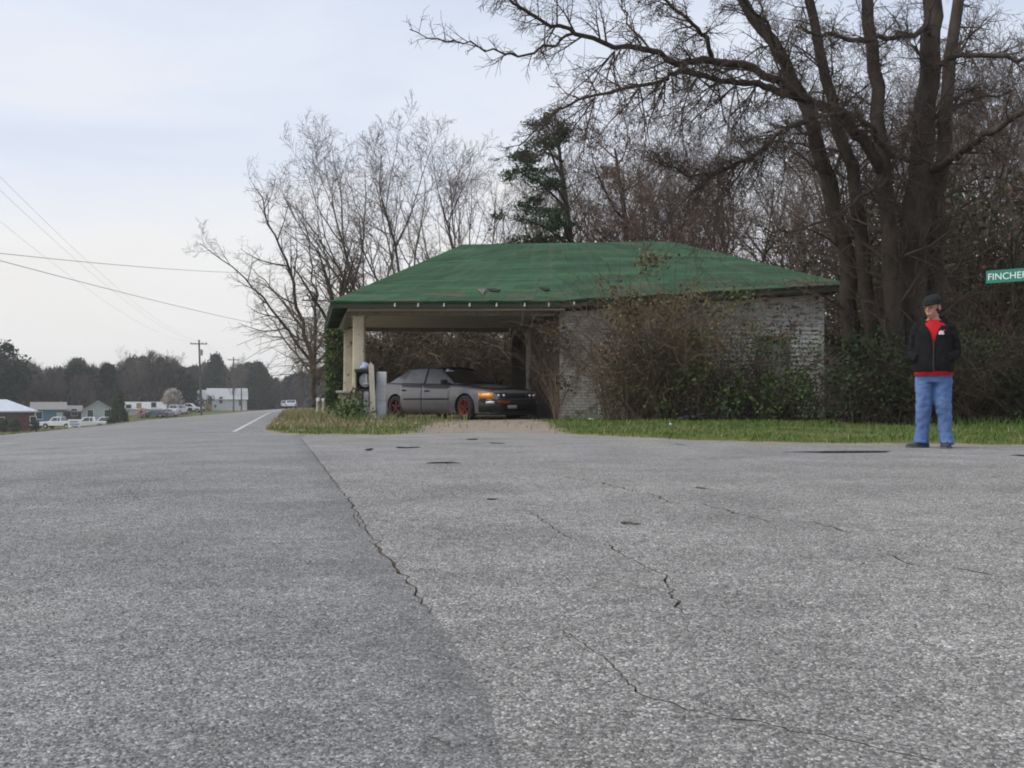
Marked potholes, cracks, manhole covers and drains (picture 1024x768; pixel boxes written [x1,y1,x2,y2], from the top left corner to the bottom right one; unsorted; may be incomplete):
crack [859,552,1024,578]
crack [563,476,845,532]
crack [524,508,686,616]
crack [518,627,943,764]
